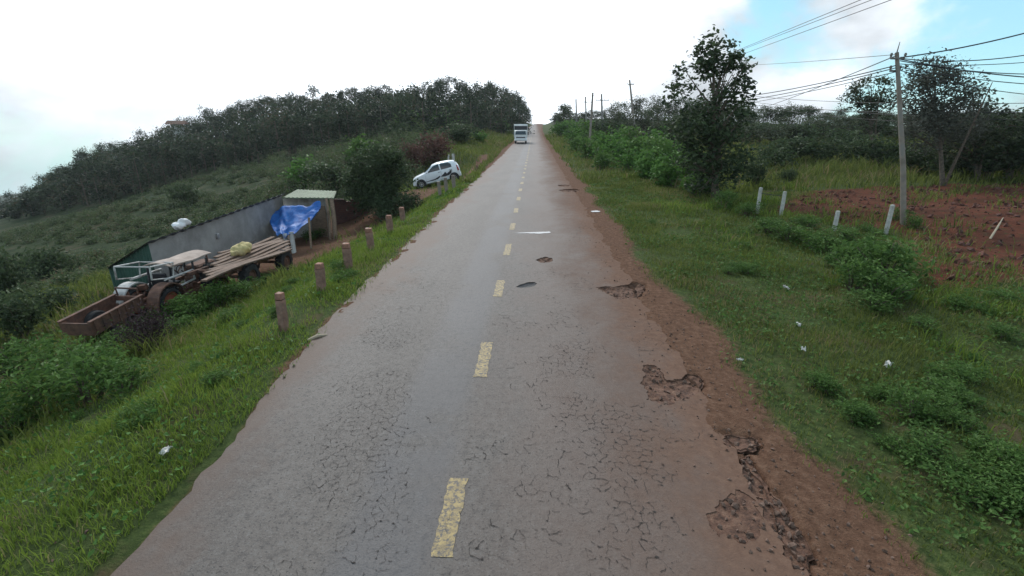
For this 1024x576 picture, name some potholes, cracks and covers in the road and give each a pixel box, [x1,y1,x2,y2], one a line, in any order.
pothole [740,455,815,575]
pothole [597,283,645,300]
crack [507,337,727,576]
pothole [723,434,762,452]
crack [254,317,428,576]
crack [446,426,592,575]
pothole [640,365,704,405]
pothole [706,490,767,544]
